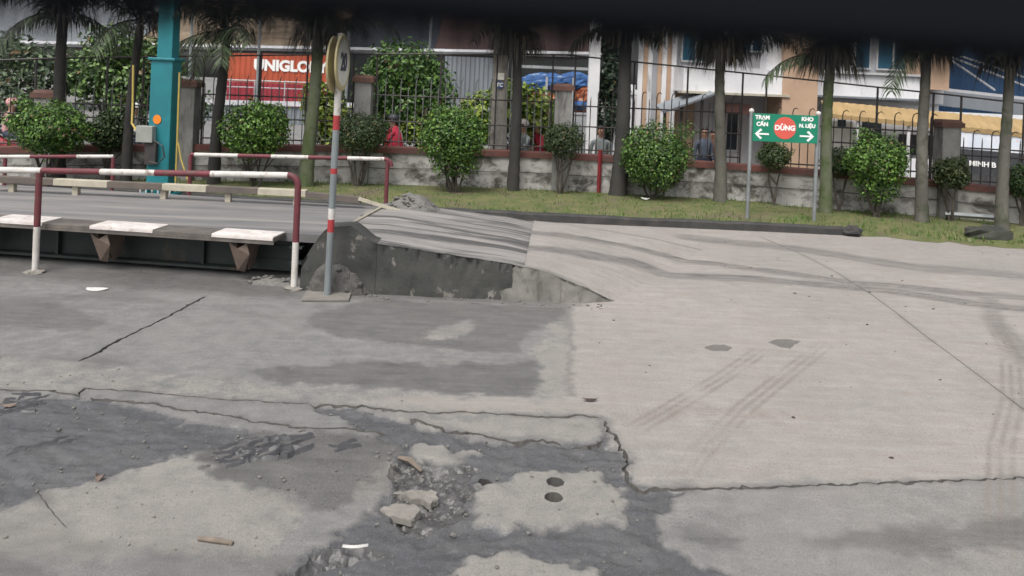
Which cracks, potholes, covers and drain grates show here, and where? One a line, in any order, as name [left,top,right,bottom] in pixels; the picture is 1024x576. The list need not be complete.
crack [79,297,205,361]
pothole [387,461,480,541]
pothole [544,492,563,502]
pothole [546,477,564,487]
crack [0,388,1024,495]
